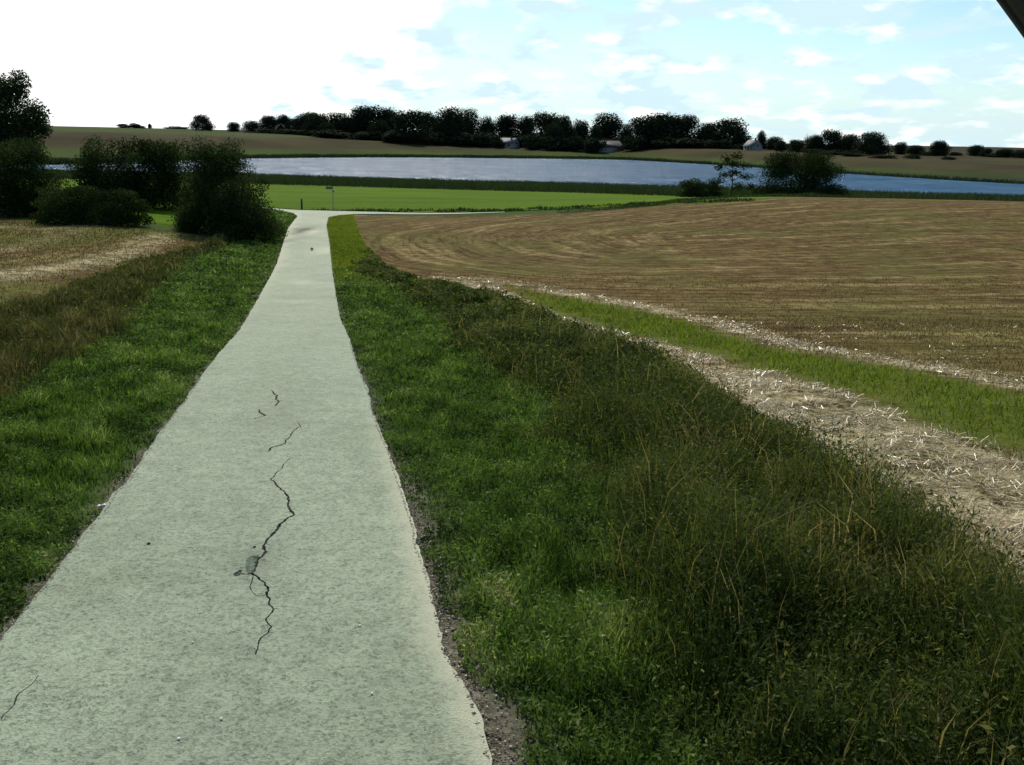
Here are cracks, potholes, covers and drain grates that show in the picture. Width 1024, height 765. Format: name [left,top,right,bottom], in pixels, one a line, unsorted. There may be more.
pothole [245,555,259,574]
crack [239,423,301,655]
crack [0,675,39,720]
